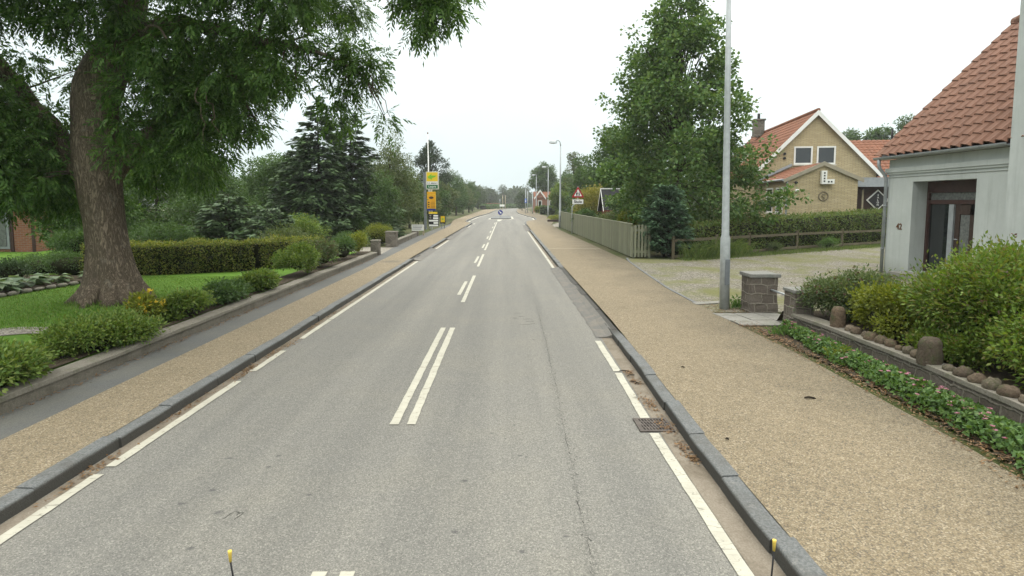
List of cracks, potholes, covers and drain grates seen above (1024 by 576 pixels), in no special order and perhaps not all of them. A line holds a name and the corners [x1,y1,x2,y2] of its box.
drain grate [633,418,675,432]
